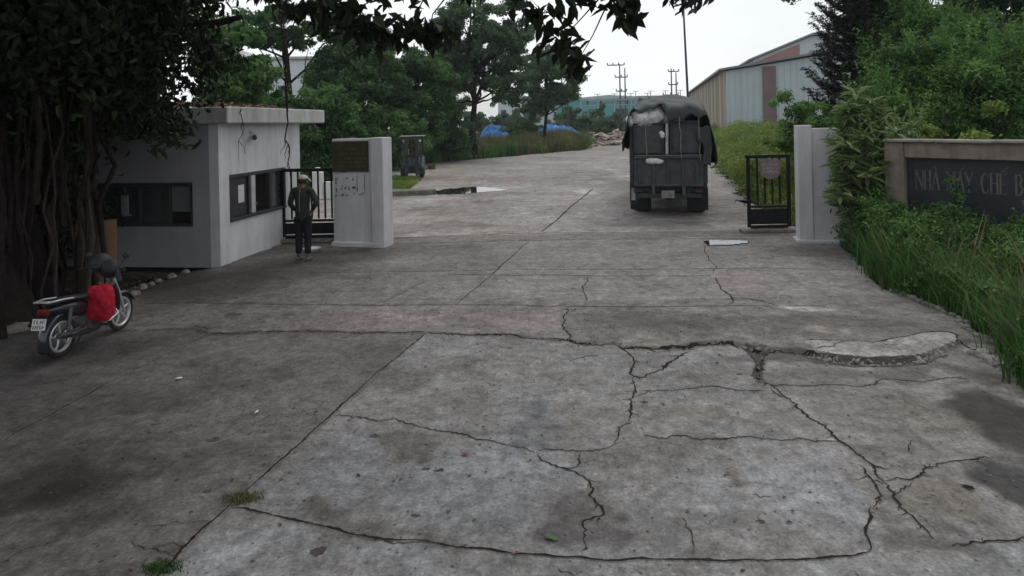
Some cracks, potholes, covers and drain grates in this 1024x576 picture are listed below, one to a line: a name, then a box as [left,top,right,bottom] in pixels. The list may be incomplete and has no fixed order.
pothole [744,342,770,383]
crack [198,278,993,551]
crack [951,537,1024,546]
crack [704,246,779,306]
pothole [801,353,930,367]
